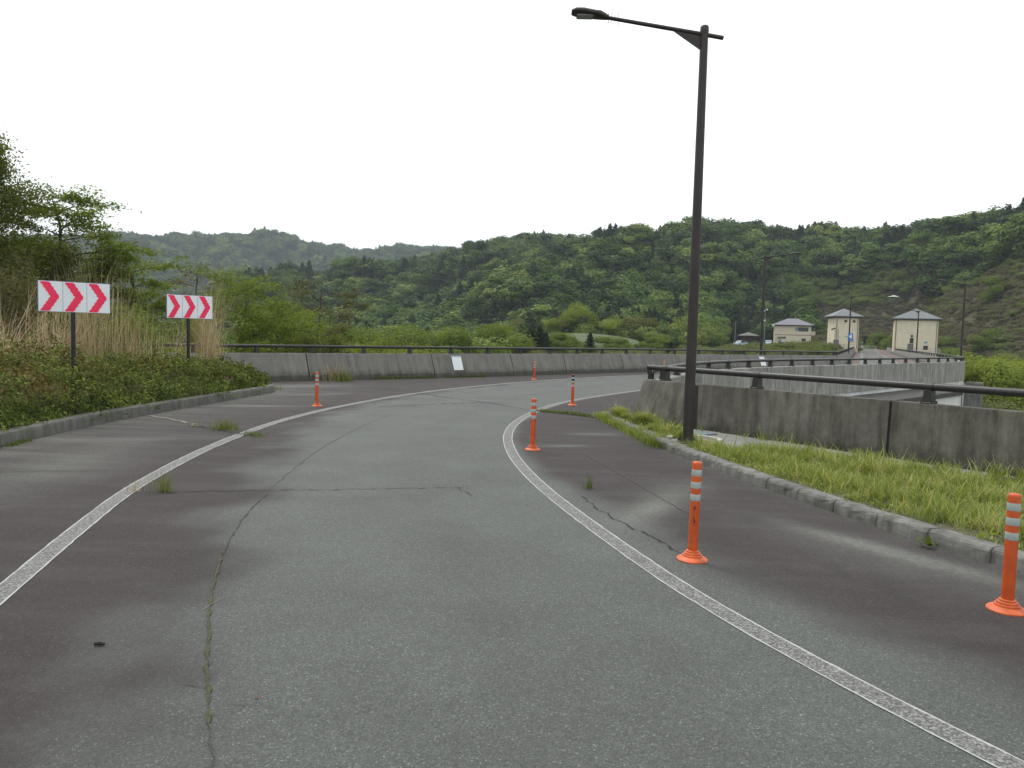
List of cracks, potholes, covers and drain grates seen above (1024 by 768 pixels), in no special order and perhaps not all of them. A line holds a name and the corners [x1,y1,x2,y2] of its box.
crack [582,496,681,553]
crack [163,402,477,768]
